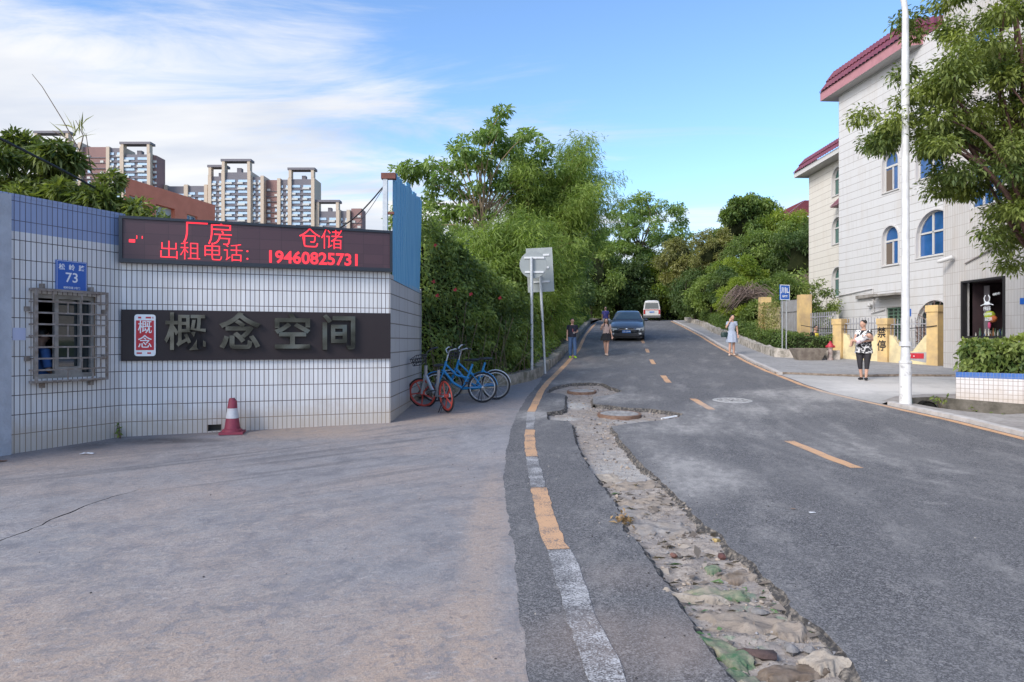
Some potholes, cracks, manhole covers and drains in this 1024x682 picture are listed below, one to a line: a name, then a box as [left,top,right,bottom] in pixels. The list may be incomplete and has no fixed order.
manhole cover [597,410,642,421]
crack [0,490,136,541]
